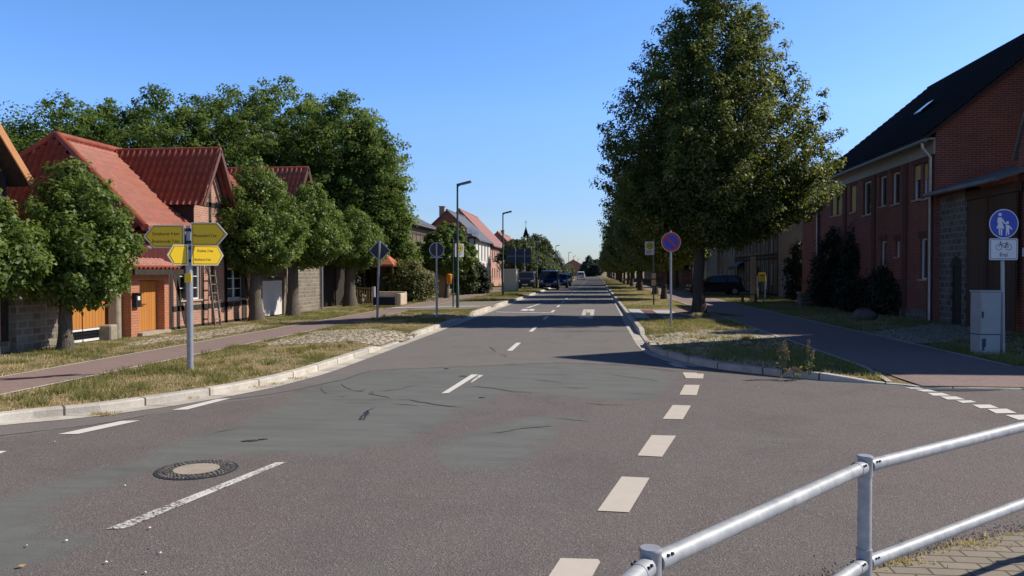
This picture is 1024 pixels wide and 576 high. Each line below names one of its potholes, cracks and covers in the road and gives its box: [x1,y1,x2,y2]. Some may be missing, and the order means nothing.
manhole cover [153,460,238,480]
crack [464,379,610,433]
crack [369,385,458,407]
